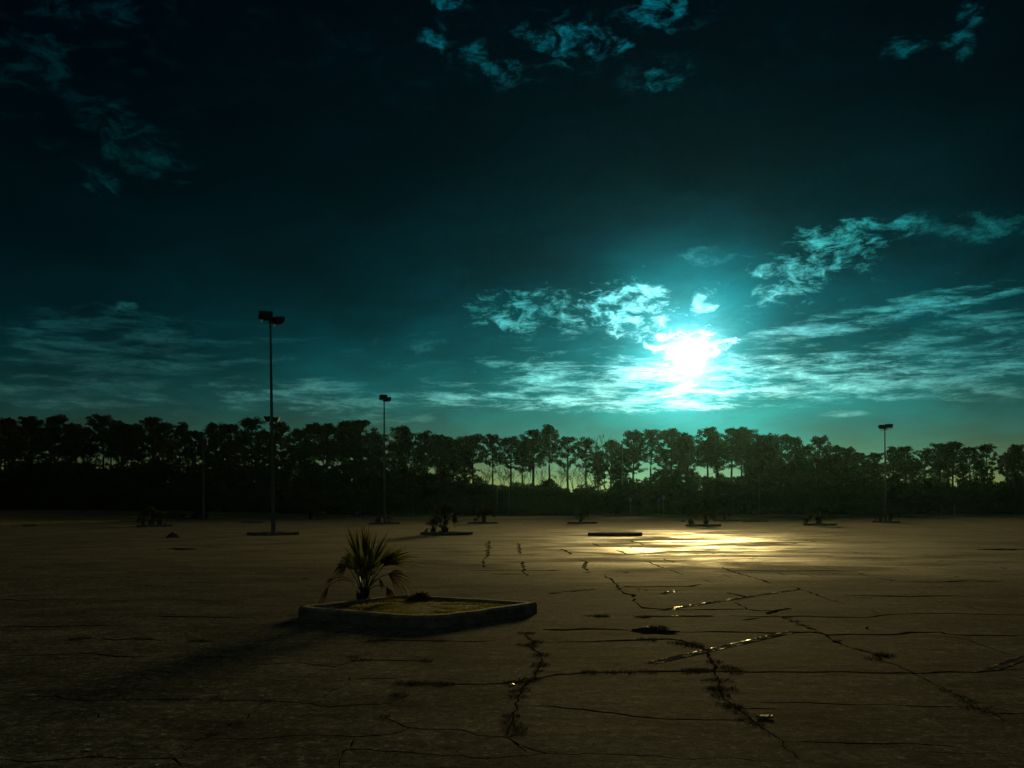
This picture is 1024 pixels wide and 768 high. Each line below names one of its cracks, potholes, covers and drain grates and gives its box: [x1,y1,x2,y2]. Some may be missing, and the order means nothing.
crack [0,541,1024,768]
